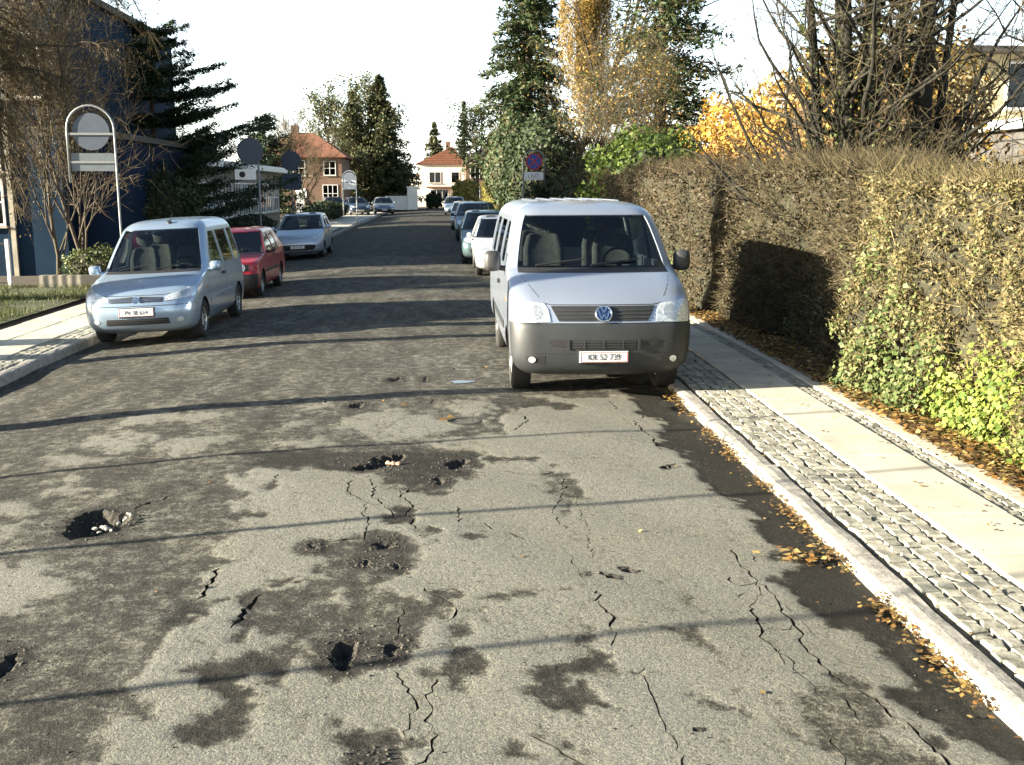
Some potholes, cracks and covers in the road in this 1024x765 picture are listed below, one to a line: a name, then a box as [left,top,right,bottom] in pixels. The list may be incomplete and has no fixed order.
pothole [351,453,406,471]
pothole [371,541,398,550]
crack [609,401,662,450]
crack [324,475,463,542]
pothole [380,639,404,659]
crack [571,555,617,646]
crack [727,550,952,765]
manhole cover [447,417,482,425]
pothole [0,647,23,678]
pothole [444,459,470,470]
pothole [61,509,132,540]
crack [355,660,439,765]
